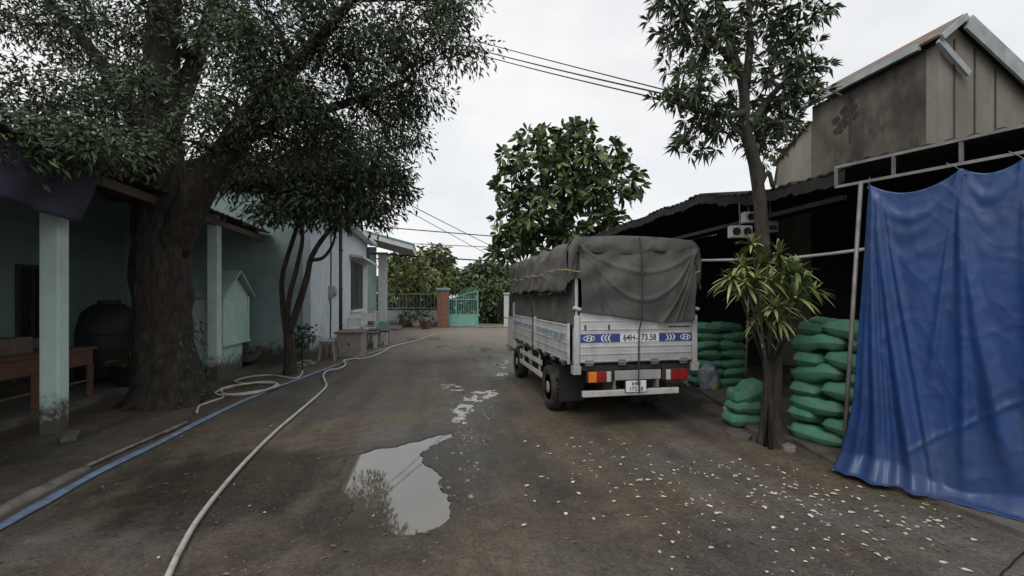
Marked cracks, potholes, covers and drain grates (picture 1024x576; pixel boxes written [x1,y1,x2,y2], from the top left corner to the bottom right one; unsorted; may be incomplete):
pothole [336,432,454,527]
